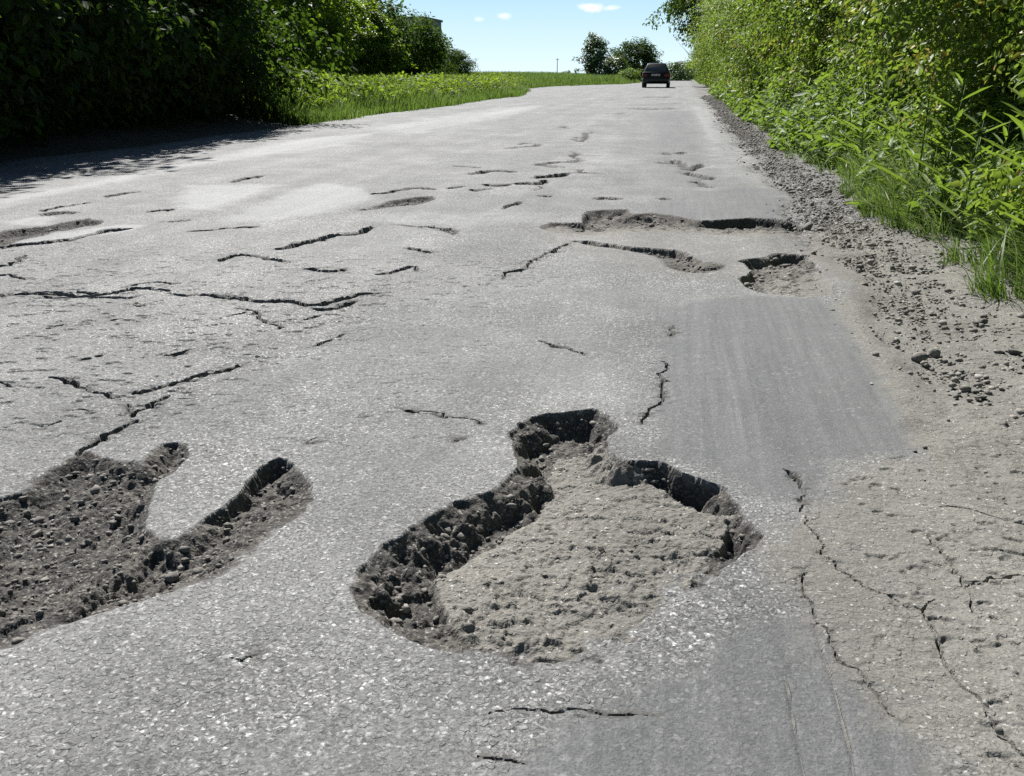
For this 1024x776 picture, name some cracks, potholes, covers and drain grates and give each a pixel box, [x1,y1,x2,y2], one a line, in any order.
crack [395,408,484,442]
pothole [738,253,835,298]
pothole [0,441,316,651]
crack [782,468,1024,759]
pothole [537,209,806,236]
pothole [348,408,766,679]
pothole [0,218,105,246]
crack [369,126,605,209]
pothole [347,196,436,211]
crack [640,361,672,424]
crack [652,152,719,188]
